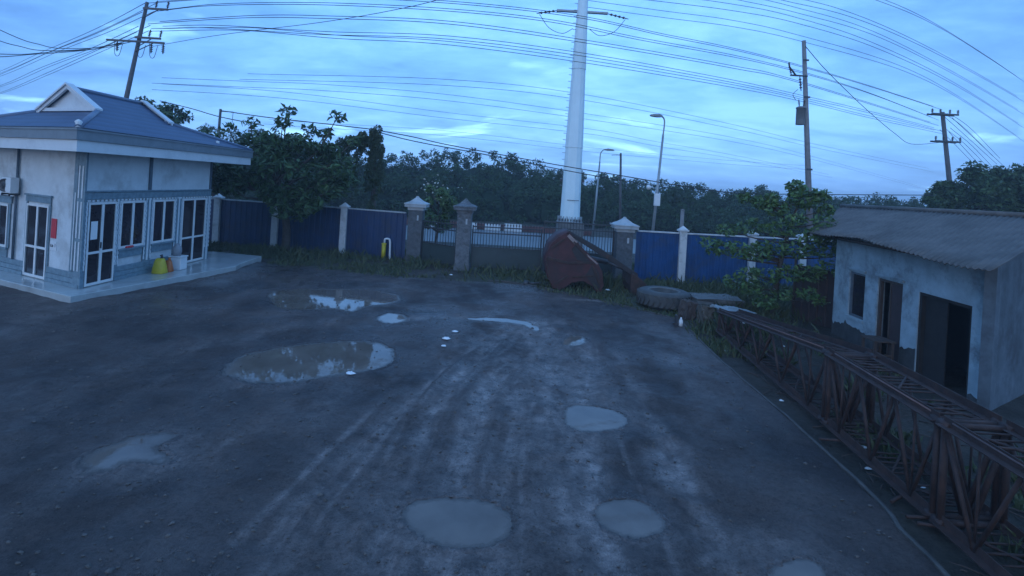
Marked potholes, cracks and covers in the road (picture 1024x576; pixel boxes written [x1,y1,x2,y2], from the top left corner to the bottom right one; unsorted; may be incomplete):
pothole [216,340,400,386]
pothole [264,288,404,313]
pothole [461,317,544,332]
pothole [558,334,590,347]
pothole [372,312,410,325]
pothole [71,429,185,478]
